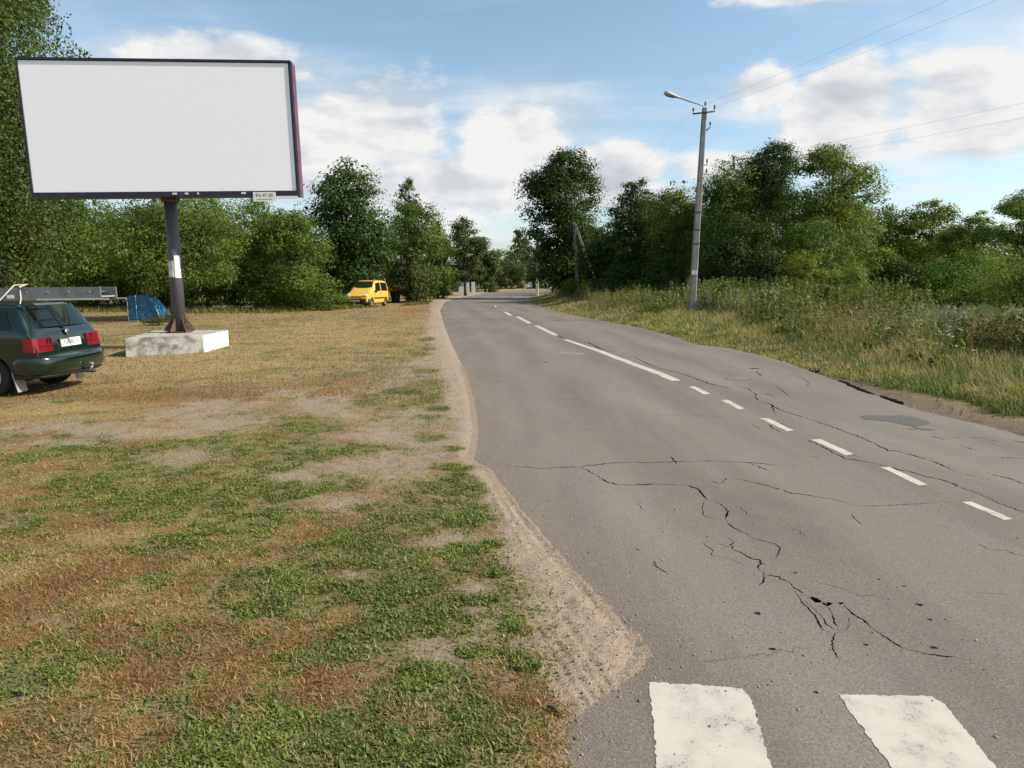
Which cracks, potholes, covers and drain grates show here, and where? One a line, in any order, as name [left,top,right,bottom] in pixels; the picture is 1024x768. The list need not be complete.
crack [743,371,1022,512]
crack [515,456,967,660]
